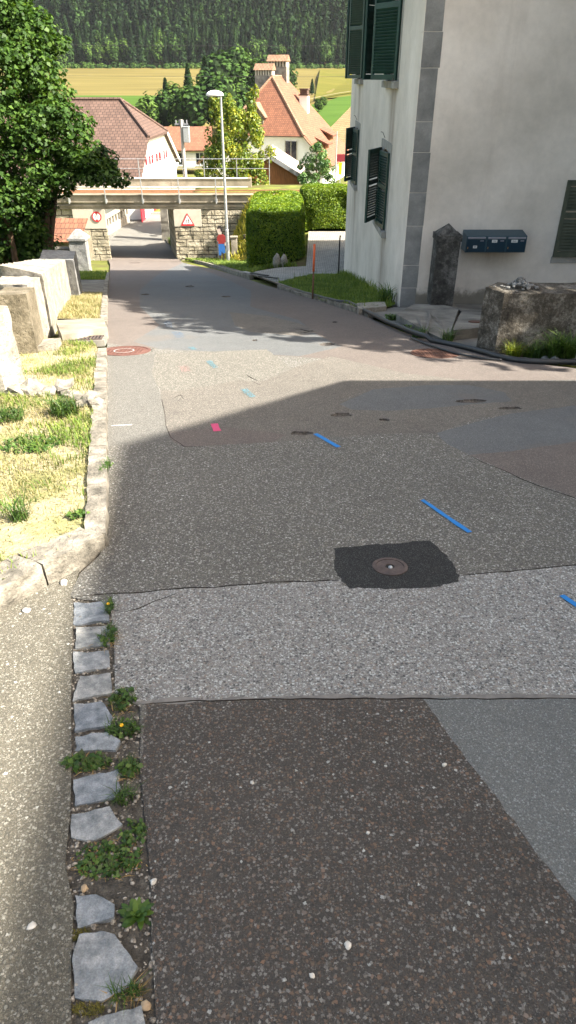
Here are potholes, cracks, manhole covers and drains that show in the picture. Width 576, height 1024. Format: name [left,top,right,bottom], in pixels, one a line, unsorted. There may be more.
manhole cover [107,346,151,356]
crack [76,580,334,612]
drain grate [70,335,108,347]
utility cover [372,557,408,576]
manhole cover [410,349,459,358]
